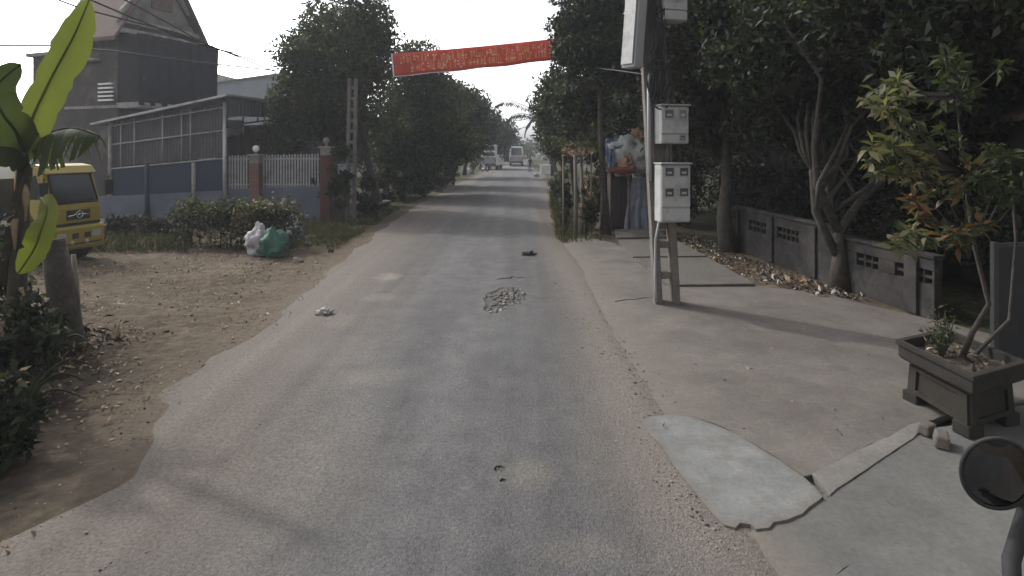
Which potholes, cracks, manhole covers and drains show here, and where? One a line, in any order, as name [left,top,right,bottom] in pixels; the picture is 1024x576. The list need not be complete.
pothole [483,287,528,313]
